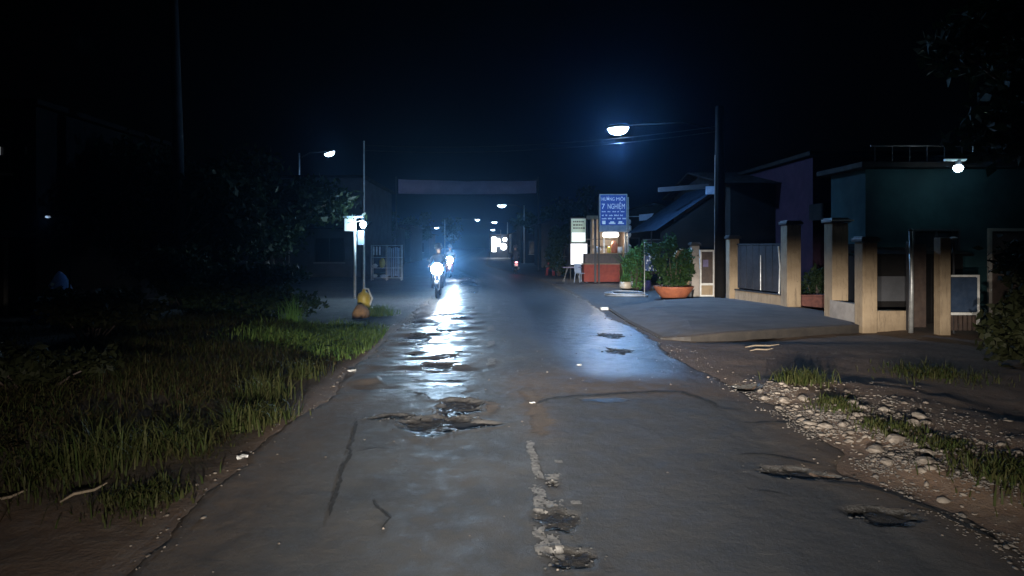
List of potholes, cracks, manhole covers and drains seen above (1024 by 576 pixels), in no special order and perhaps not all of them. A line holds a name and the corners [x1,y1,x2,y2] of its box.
pothole [842,505,928,527]
pothole [533,506,581,533]
pothole [760,466,849,480]
crack [329,421,391,531]
pothole [418,361,460,371]
pothole [397,332,432,344]
pothole [434,396,485,420]
pothole [550,547,597,569]
pothole [395,415,484,437]
